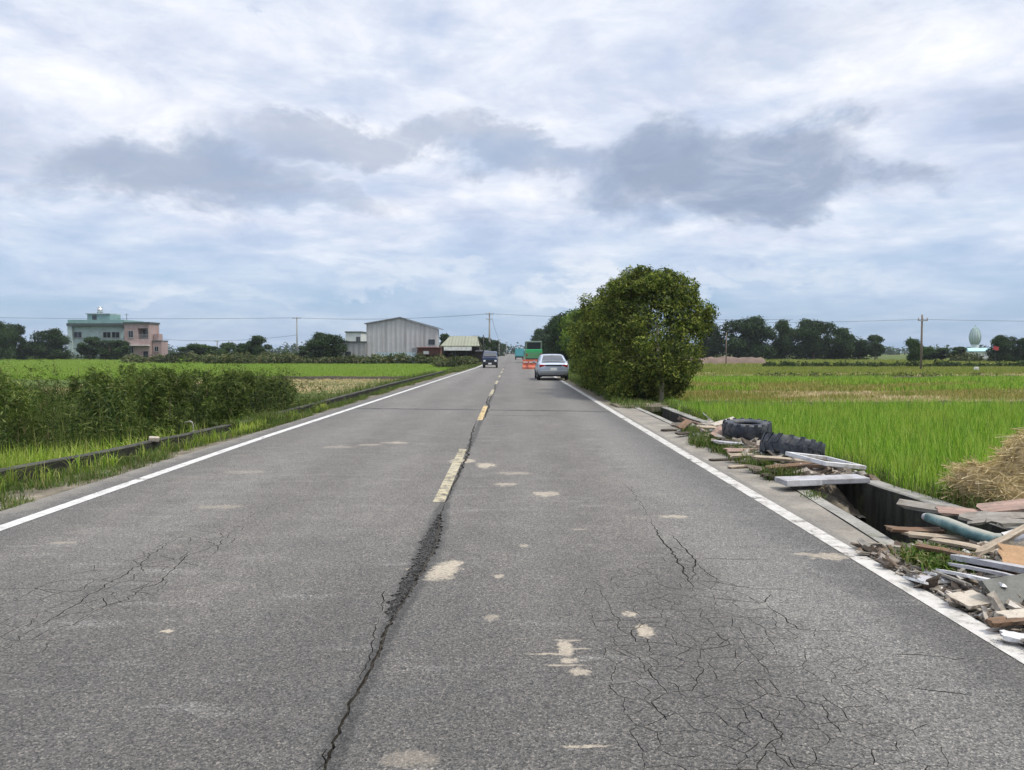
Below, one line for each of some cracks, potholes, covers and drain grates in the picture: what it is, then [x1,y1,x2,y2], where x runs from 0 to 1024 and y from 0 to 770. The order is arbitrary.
crack [584,483,957,770]
crack [317,504,445,770]
crack [0,495,300,656]
